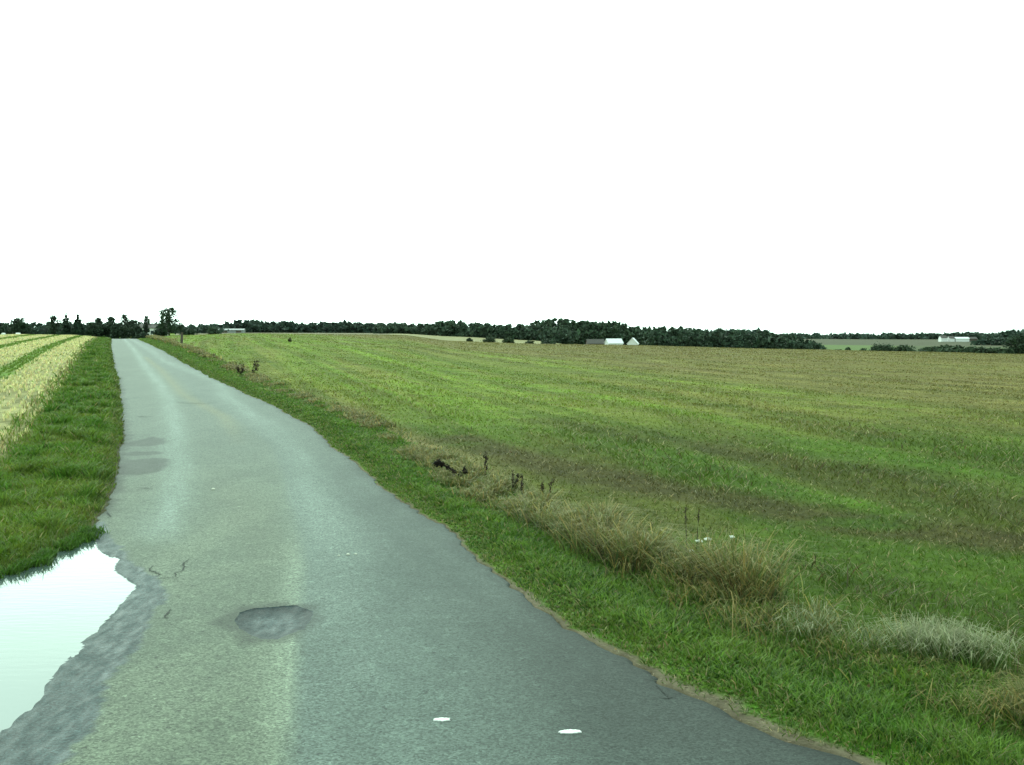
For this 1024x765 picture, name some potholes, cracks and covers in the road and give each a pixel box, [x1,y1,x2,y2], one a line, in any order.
pothole [235,605,313,639]
